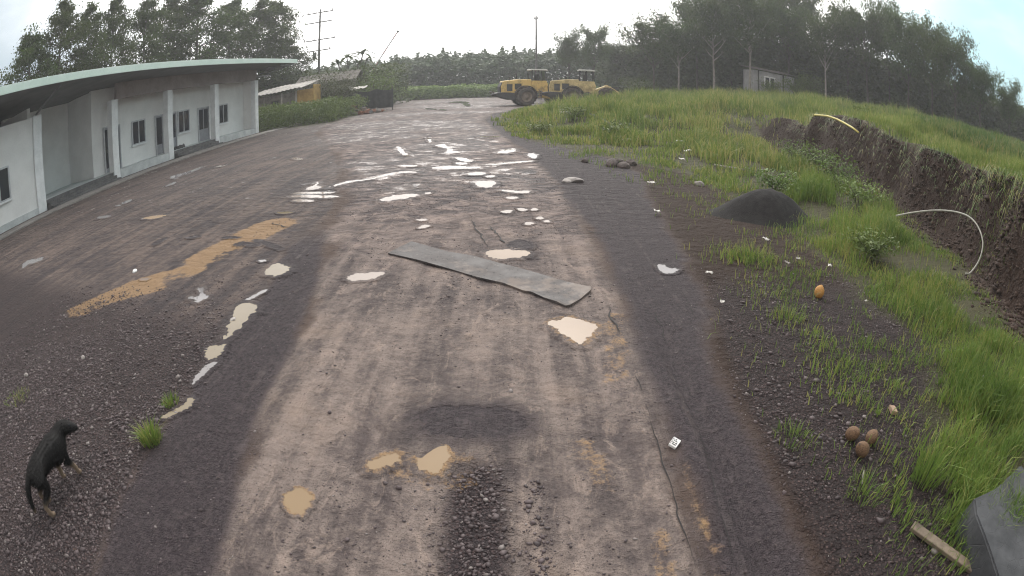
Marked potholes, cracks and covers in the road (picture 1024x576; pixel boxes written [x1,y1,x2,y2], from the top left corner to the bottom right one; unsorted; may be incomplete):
pothole [373,385,576,472]
pothole [278,484,320,521]
pothole [536,312,610,352]
pothole [354,448,408,480]
pothole [404,444,460,484]
